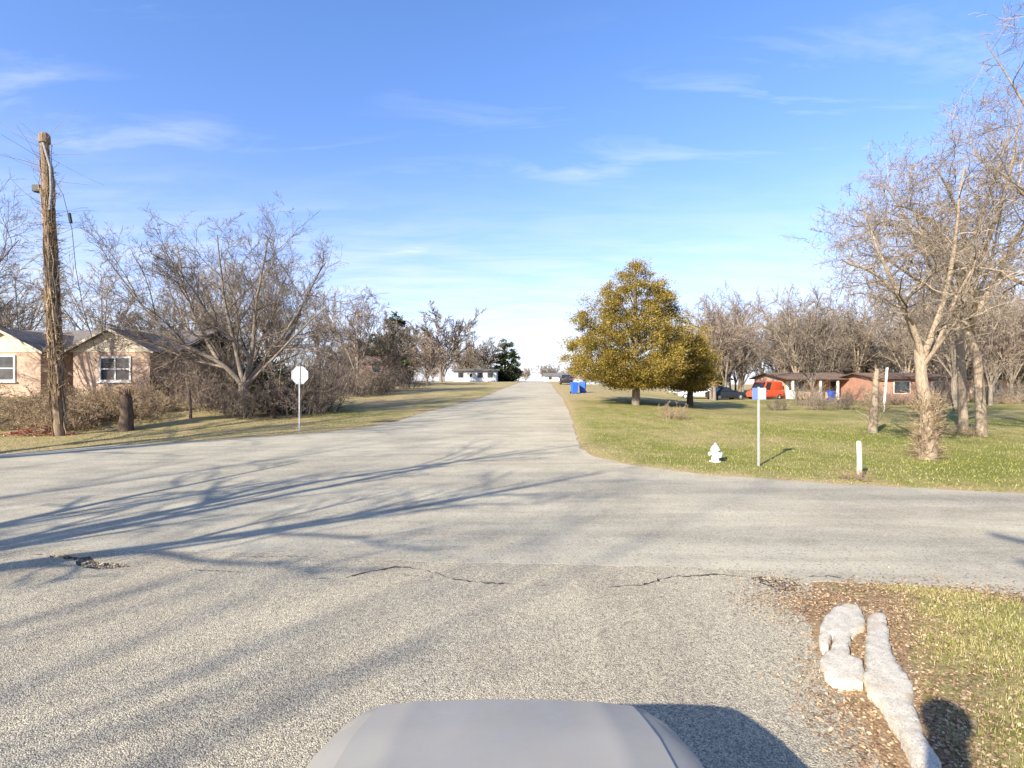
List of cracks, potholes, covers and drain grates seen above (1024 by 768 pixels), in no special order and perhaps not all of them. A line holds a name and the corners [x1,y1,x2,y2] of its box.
crack [613,571,743,587]
pothole [50,555,131,570]
crack [317,566,509,584]
